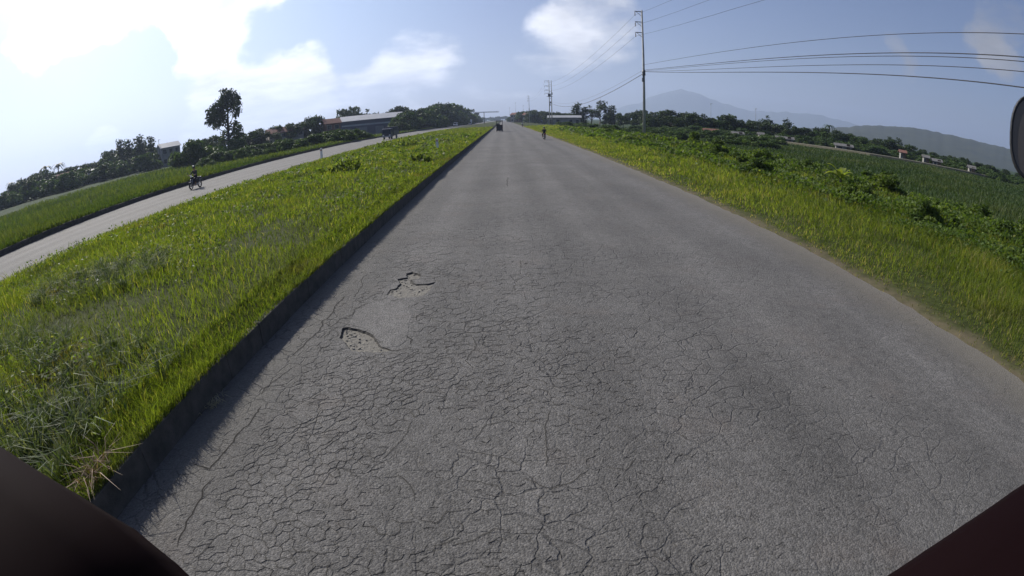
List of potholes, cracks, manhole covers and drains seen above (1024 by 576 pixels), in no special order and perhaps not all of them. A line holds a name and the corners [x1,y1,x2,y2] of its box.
pothole [340,327,390,353]
crack [164,222,1016,576]
pothole [387,272,435,298]
